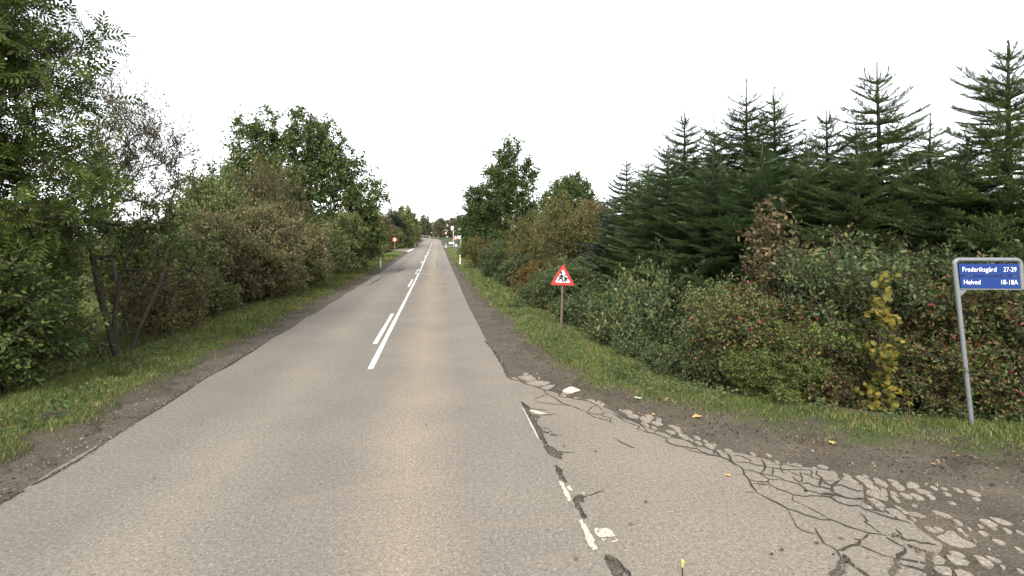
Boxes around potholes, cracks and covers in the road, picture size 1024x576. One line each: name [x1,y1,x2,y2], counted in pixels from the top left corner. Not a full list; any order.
crack [485,341,936,576]
